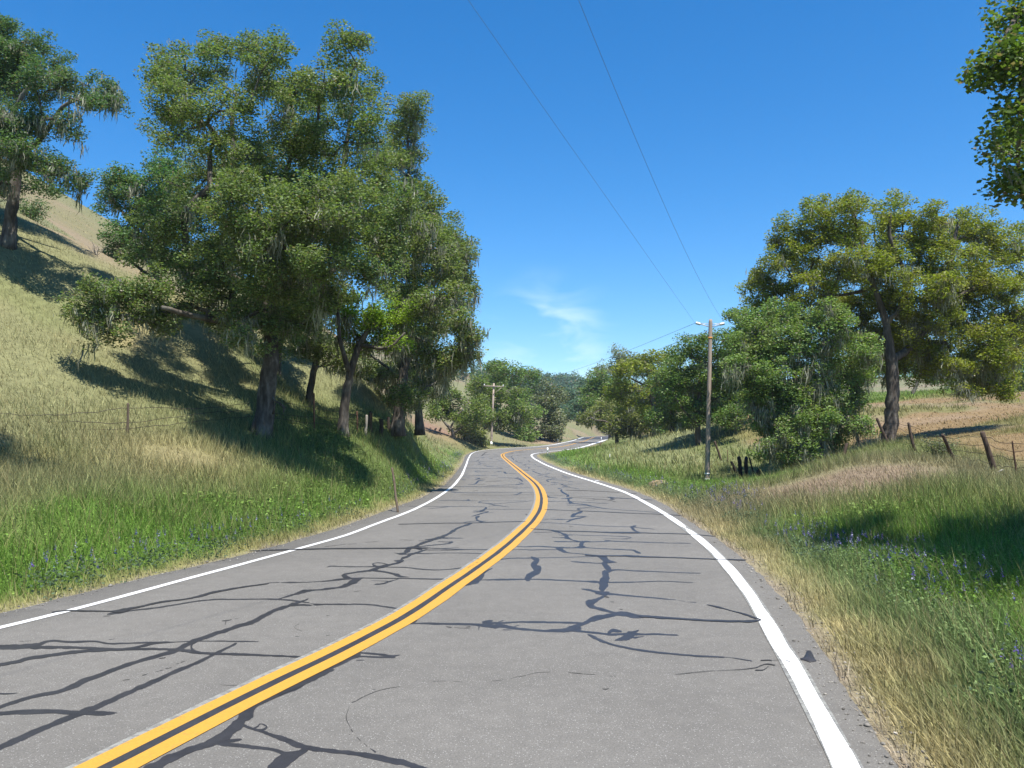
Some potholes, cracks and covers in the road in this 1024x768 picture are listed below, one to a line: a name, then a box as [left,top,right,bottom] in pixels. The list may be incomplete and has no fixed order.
crack [346,686,400,746]
crack [680,656,790,674]
